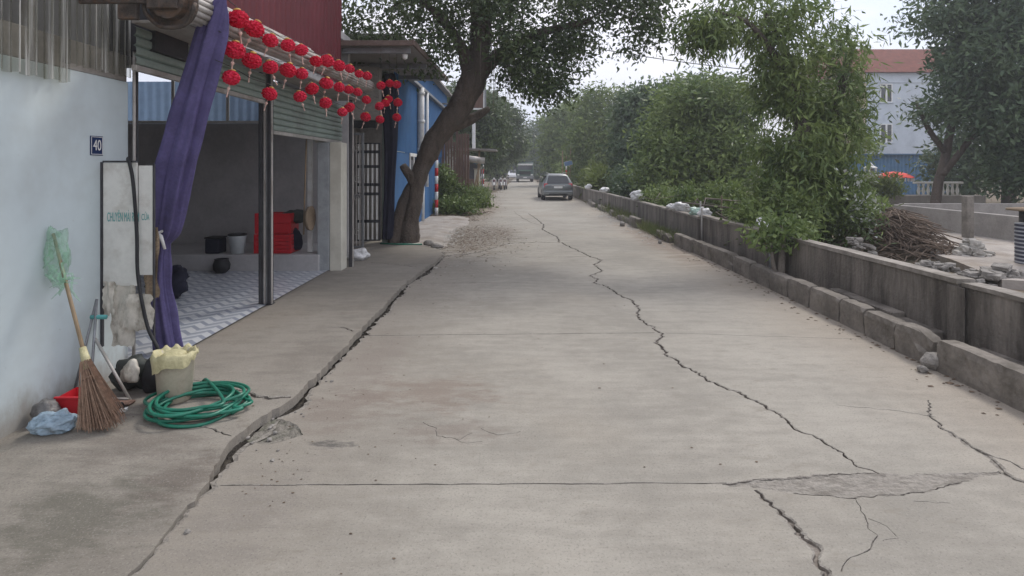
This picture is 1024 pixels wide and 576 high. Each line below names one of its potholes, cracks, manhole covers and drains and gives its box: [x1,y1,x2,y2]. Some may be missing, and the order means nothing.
crack [131,211,1024,576]
